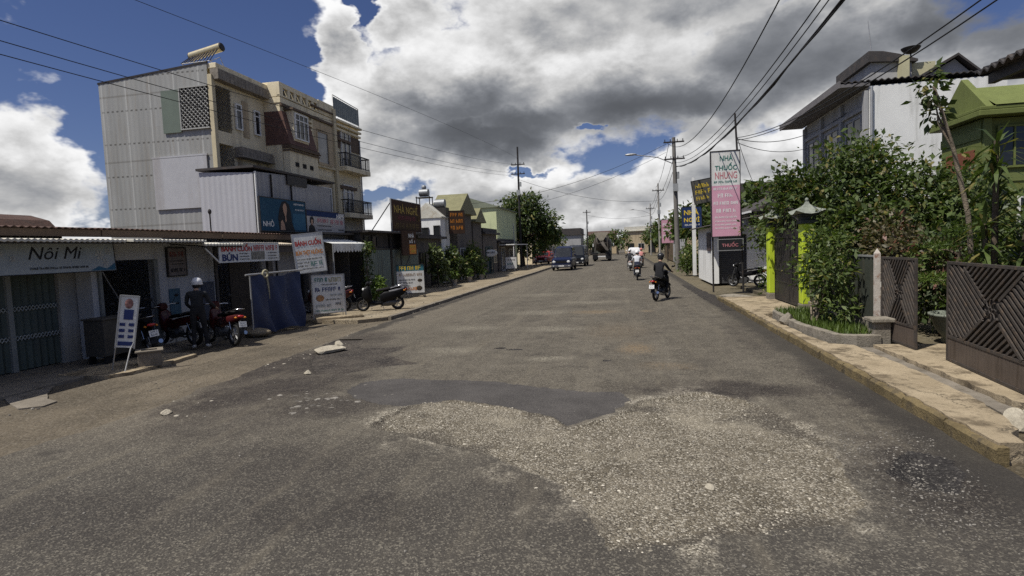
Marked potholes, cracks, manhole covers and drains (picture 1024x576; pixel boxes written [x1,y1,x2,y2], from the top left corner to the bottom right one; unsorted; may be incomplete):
pothole [885,451,968,495]
pothole [371,392,867,551]
